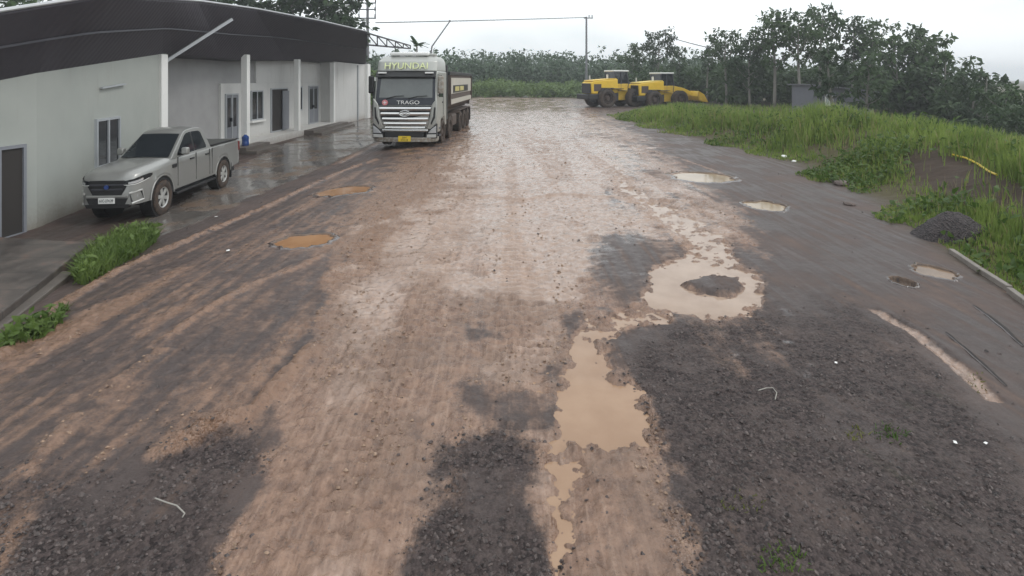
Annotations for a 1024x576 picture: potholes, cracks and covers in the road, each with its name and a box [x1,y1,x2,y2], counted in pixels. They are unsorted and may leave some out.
pothole [308,185,375,198]
pothole [739,199,791,213]
pothole [663,171,742,184]
pothole [886,275,920,289]
crack [945,304,1024,386]
pothole [907,262,964,281]
pothole [267,232,340,250]
